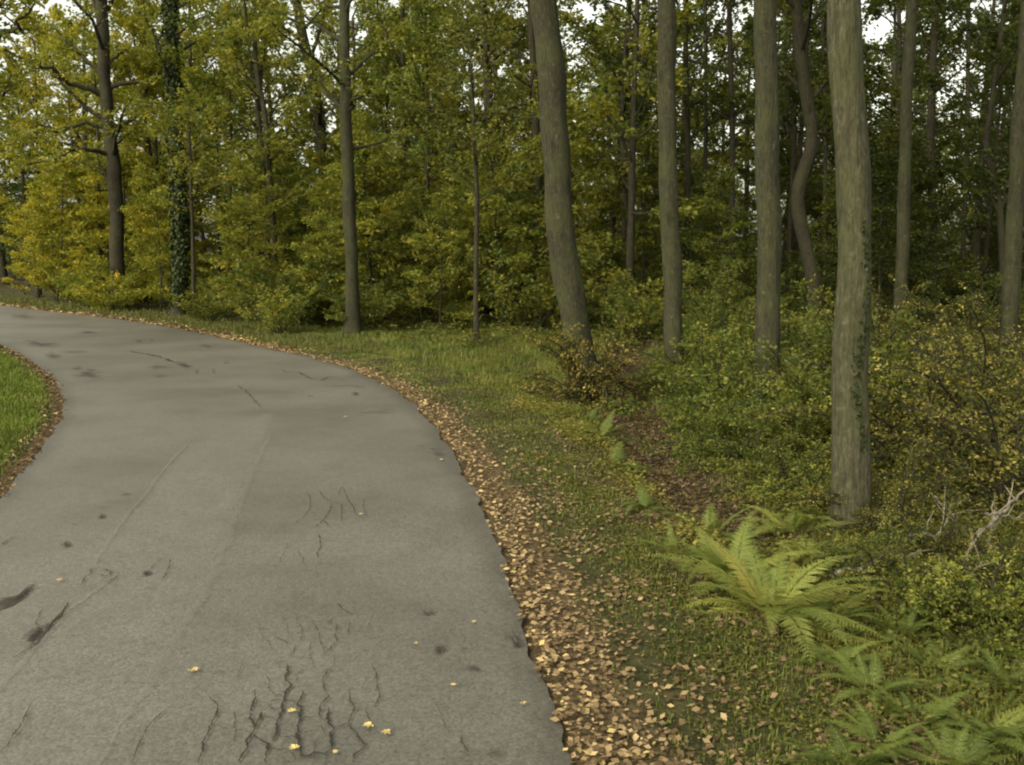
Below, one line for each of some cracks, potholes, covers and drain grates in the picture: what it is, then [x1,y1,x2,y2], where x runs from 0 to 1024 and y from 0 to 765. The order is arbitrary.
crack [296,487,356,563]
crack [198,603,381,763]
crack [1,704,31,751]
crack [133,703,174,760]
